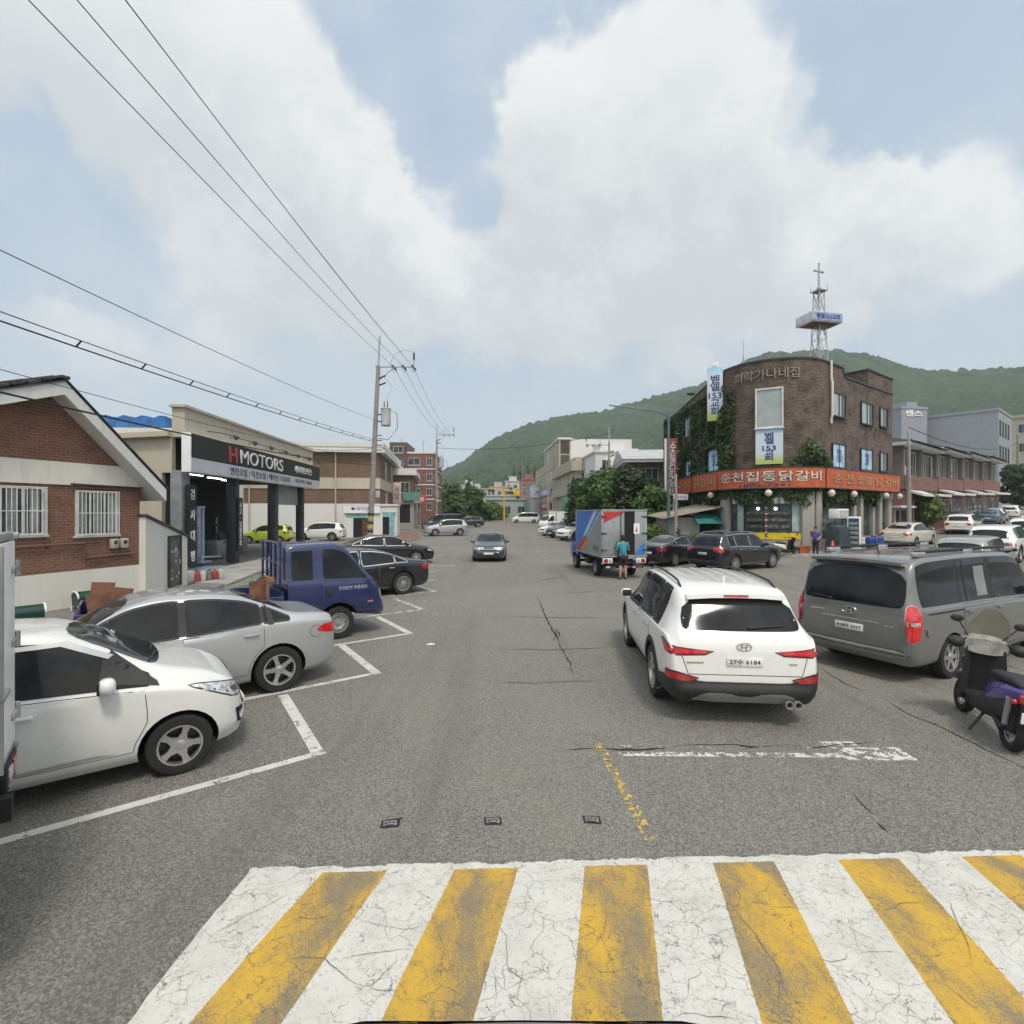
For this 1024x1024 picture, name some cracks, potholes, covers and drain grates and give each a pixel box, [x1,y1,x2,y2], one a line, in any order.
crack [504,602,626,683]
crack [824,670,1024,768]
crack [568,742,868,750]
